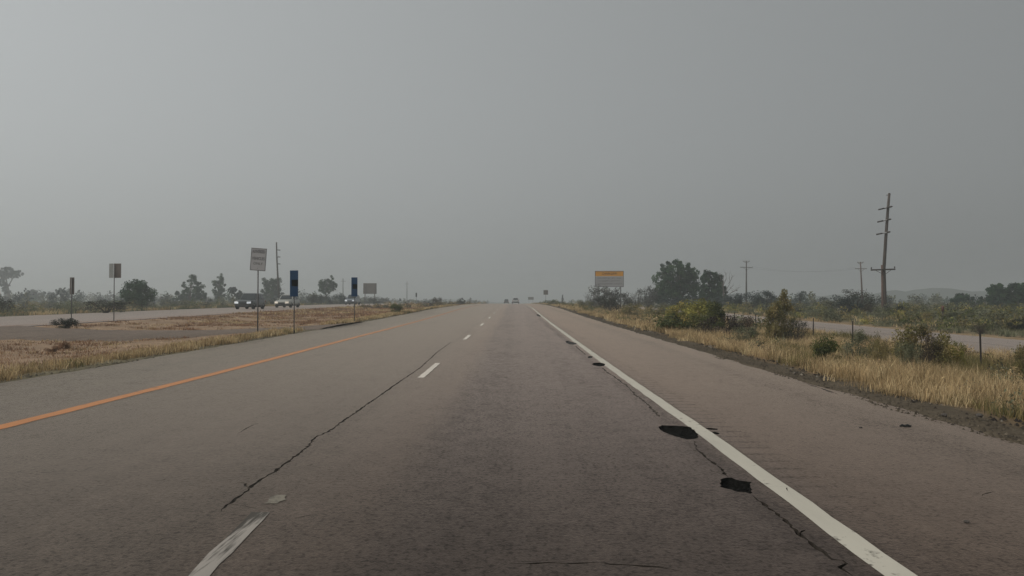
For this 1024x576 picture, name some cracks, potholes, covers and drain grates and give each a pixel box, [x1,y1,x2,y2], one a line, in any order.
pothole [659,425,698,439]
pothole [719,477,752,494]
crack [753,488,853,576]
crack [694,441,728,477]
crack [221,342,451,511]
crack [509,562,678,571]
